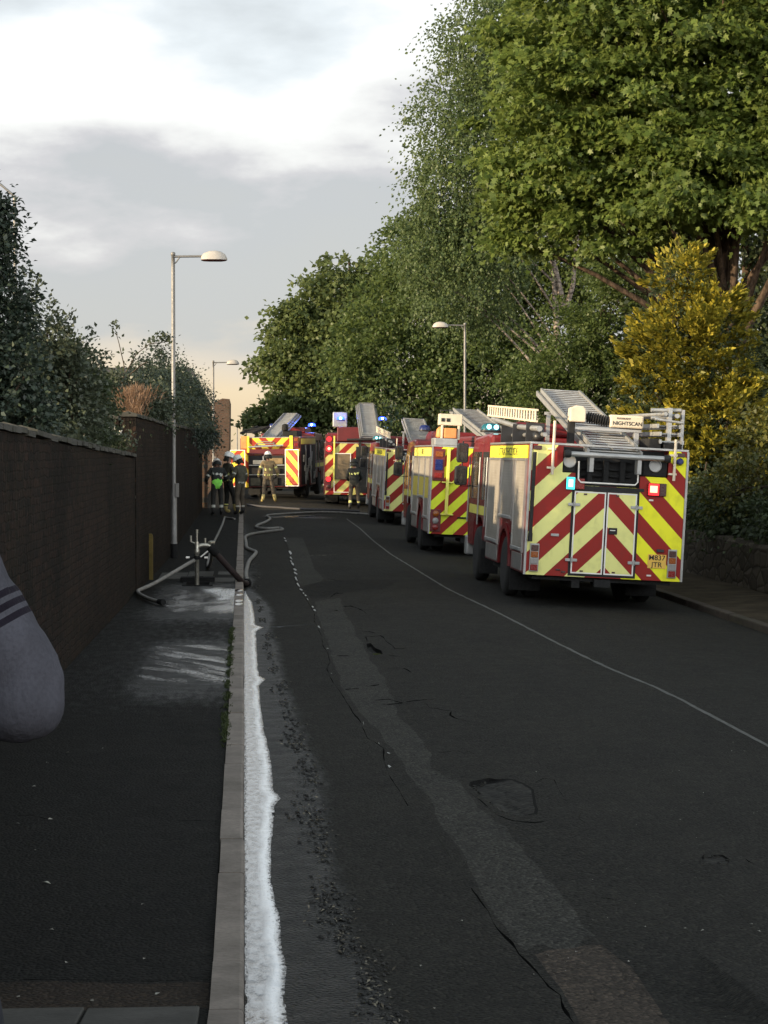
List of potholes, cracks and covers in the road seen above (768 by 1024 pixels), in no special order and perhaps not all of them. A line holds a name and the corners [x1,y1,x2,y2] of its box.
crack [338,631,410,672]
crack [345,684,465,721]
pothole [469,778,545,823]
pothole [701,854,729,865]
crack [471,888,574,1023]
